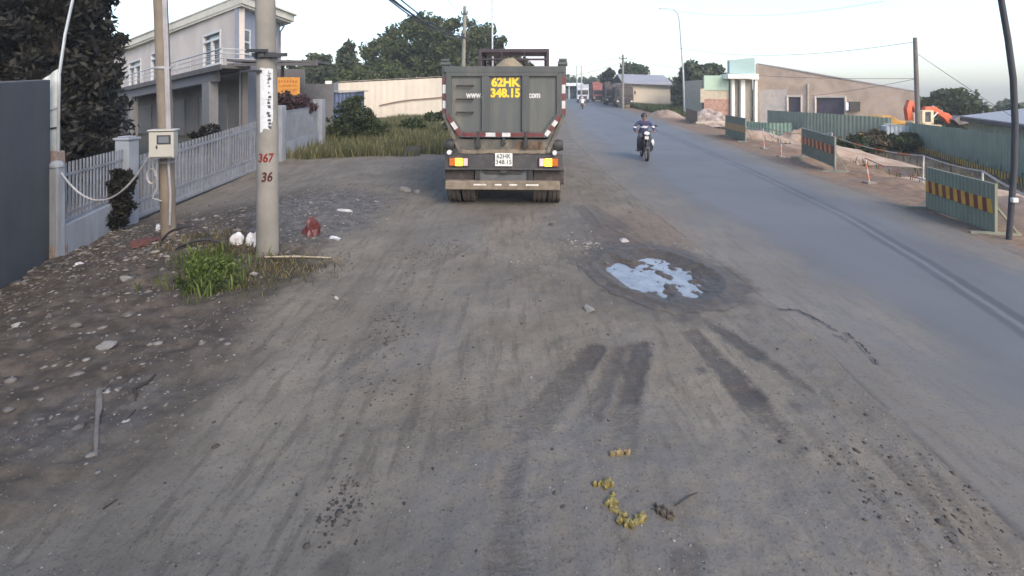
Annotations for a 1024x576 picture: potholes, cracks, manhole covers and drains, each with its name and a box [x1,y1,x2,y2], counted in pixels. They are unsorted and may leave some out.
pothole [577,243,746,315]
crack [777,308,879,364]
